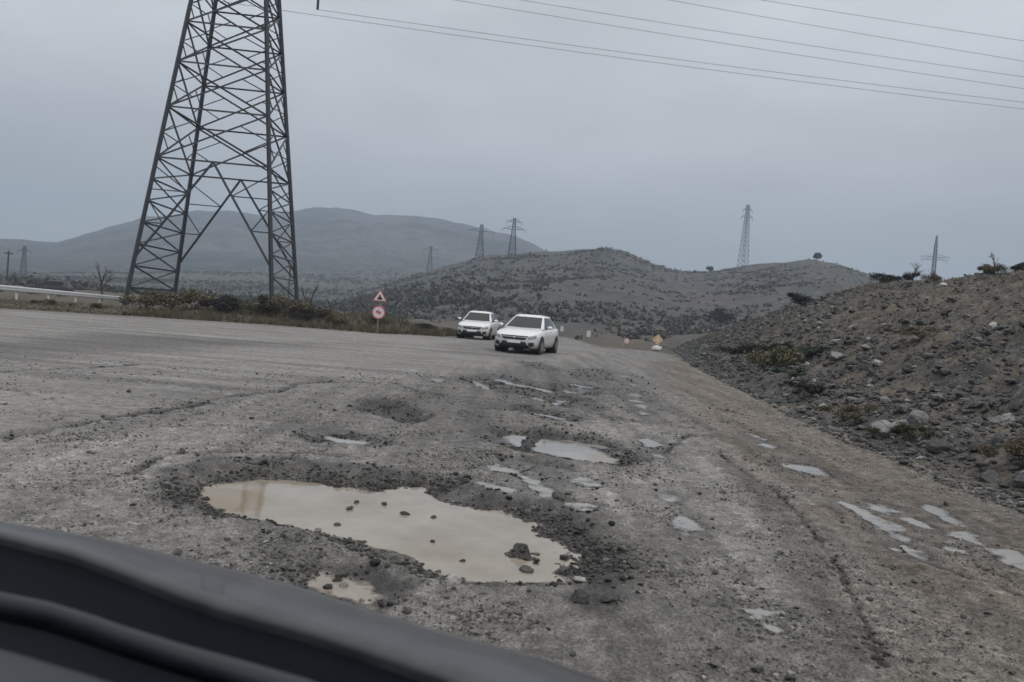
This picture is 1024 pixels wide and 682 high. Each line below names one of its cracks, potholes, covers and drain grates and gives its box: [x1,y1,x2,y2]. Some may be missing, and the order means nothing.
pothole [352,397,435,423]
pothole [472,424,655,466]
pothole [456,374,575,401]
pothole [158,461,629,591]
pothole [557,382,604,396]
pothole [289,424,406,447]
